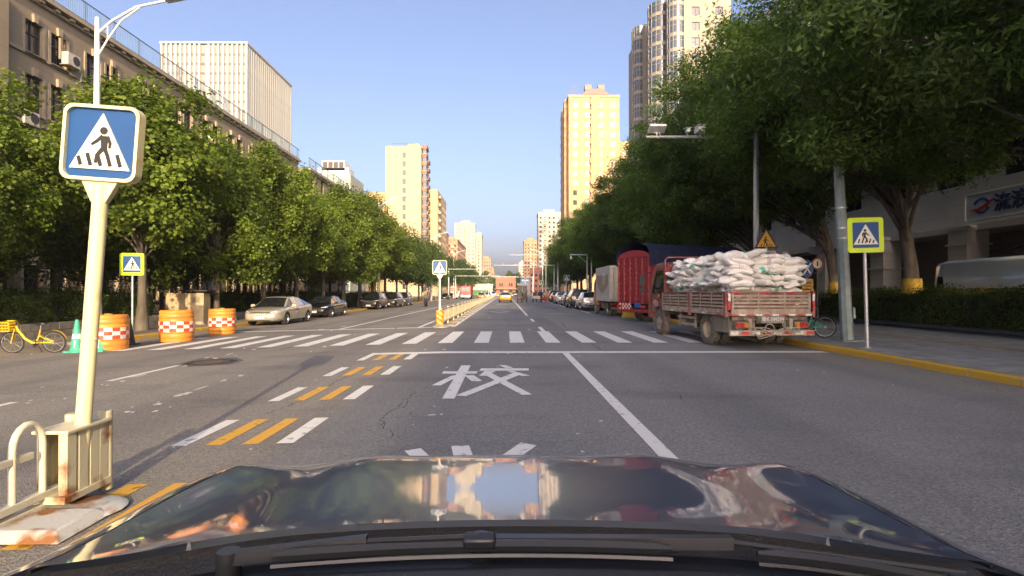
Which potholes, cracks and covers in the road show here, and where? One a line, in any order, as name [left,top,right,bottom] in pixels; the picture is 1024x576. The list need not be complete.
crack [380,386,428,438]
